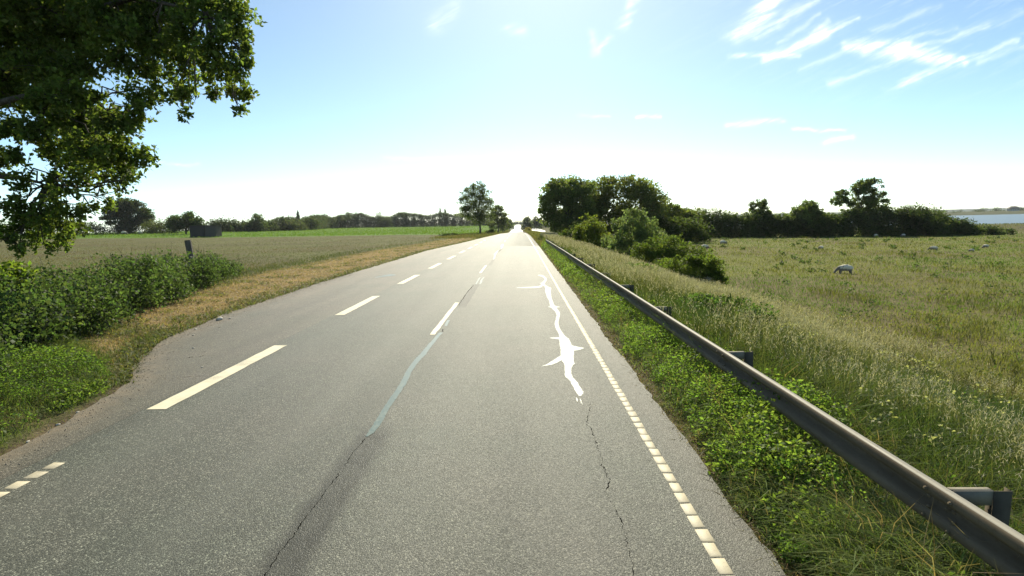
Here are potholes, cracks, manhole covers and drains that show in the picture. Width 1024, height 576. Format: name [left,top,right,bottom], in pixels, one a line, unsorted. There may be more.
crack [586,408,634,576]
crack [264,439,365,576]
